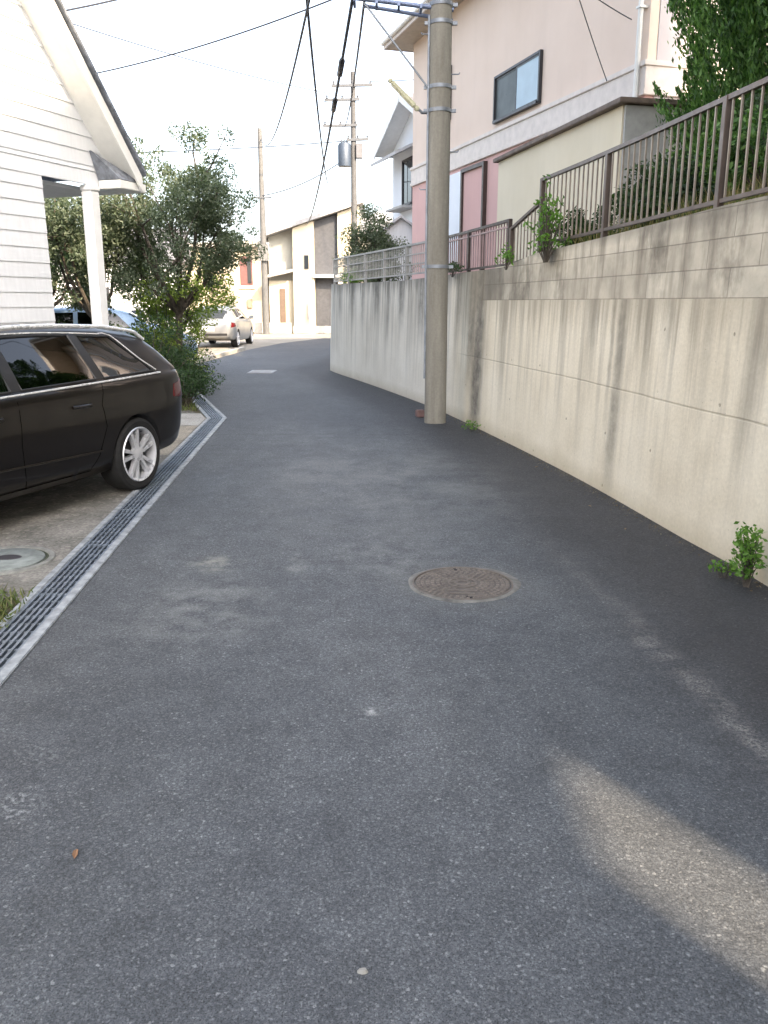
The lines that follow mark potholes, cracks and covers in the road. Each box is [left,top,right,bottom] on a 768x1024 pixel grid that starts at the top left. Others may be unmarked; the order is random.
manhole cover [408,566,521,603]
manhole cover [0,546,56,575]
